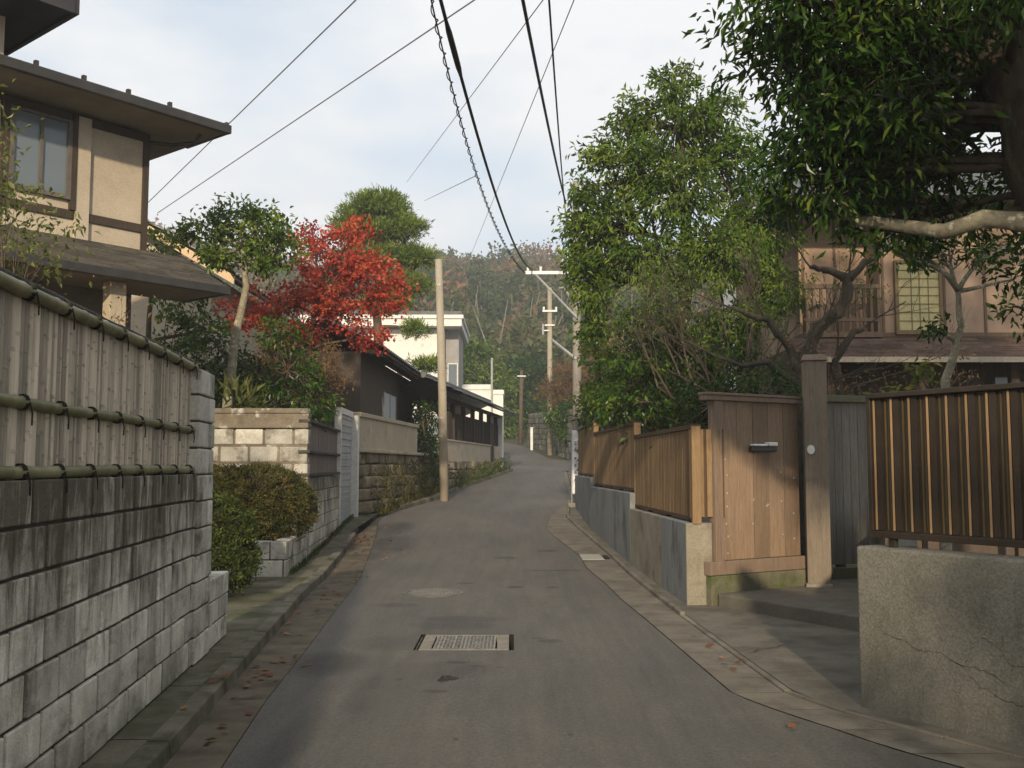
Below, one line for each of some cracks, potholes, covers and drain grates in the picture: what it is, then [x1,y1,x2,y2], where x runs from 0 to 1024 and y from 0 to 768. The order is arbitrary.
drain grate [413,635,514,650]
manhole cover [402,588,464,597]
